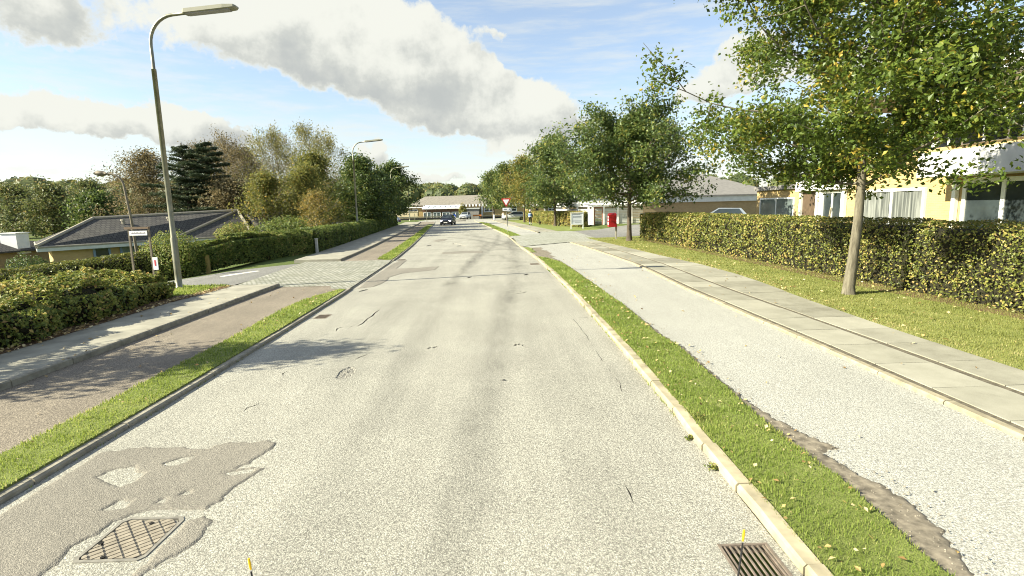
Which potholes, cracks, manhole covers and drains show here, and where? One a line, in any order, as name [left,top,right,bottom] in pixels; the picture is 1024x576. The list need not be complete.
pothole [335,367,356,379]
drain grate [717,542,793,576]
